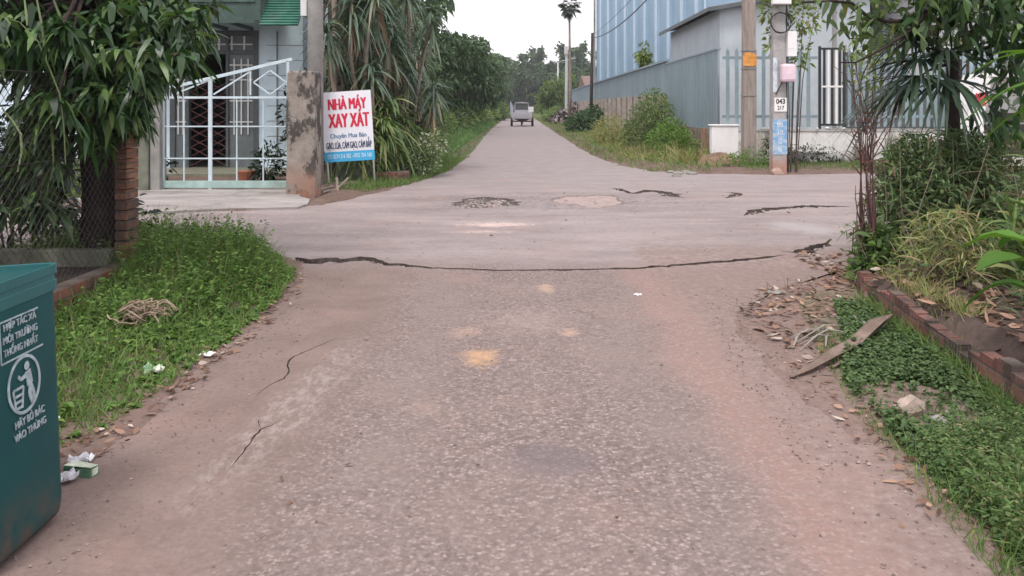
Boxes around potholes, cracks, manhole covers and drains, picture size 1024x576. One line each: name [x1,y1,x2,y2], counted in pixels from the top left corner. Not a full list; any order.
crack [613,188,686,198]
crack [256,338,336,396]
crack [295,242,832,271]
pothole [441,196,526,209]
crack [230,417,282,468]
crack [725,192,851,216]
